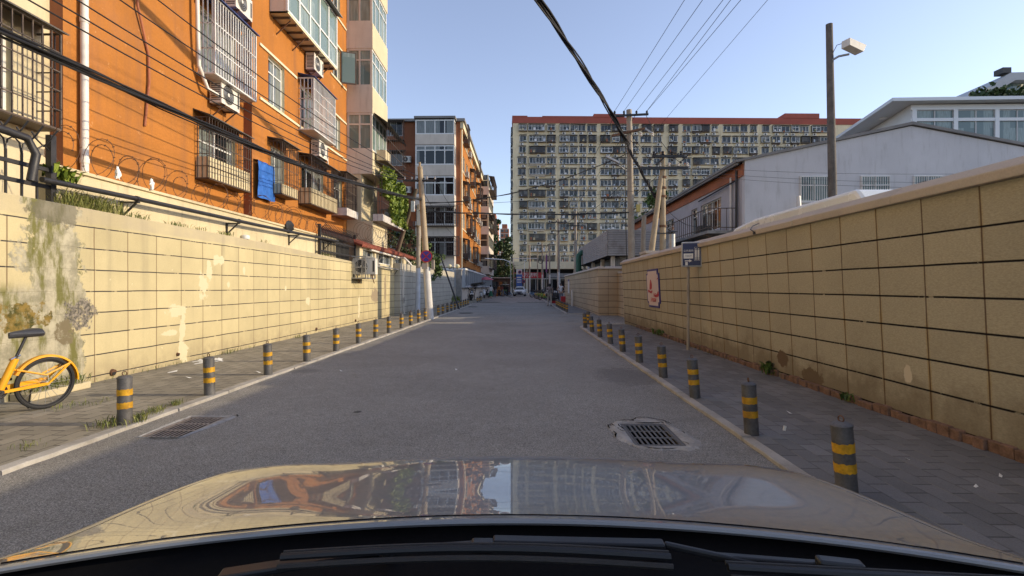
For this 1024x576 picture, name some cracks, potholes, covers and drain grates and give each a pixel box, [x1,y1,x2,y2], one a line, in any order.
drain grate [609,418,703,451]
drain grate [137,415,237,438]
